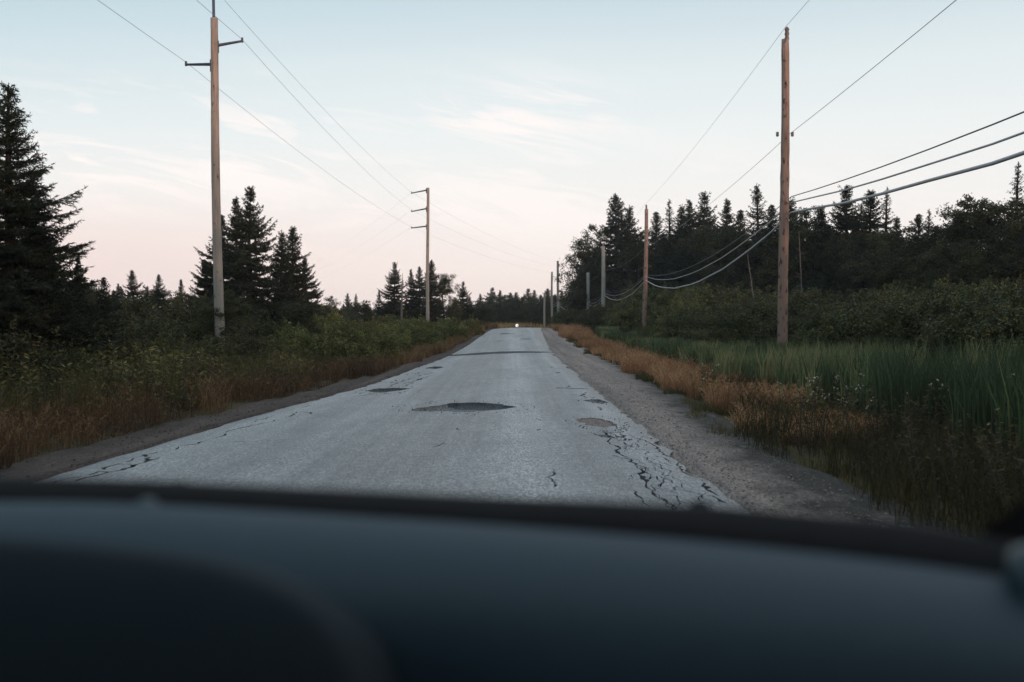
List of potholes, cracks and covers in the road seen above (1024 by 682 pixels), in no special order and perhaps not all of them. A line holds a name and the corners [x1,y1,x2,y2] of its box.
crack [593,426,726,505]
pothole [413,402,515,412]
crack [71,406,312,478]
